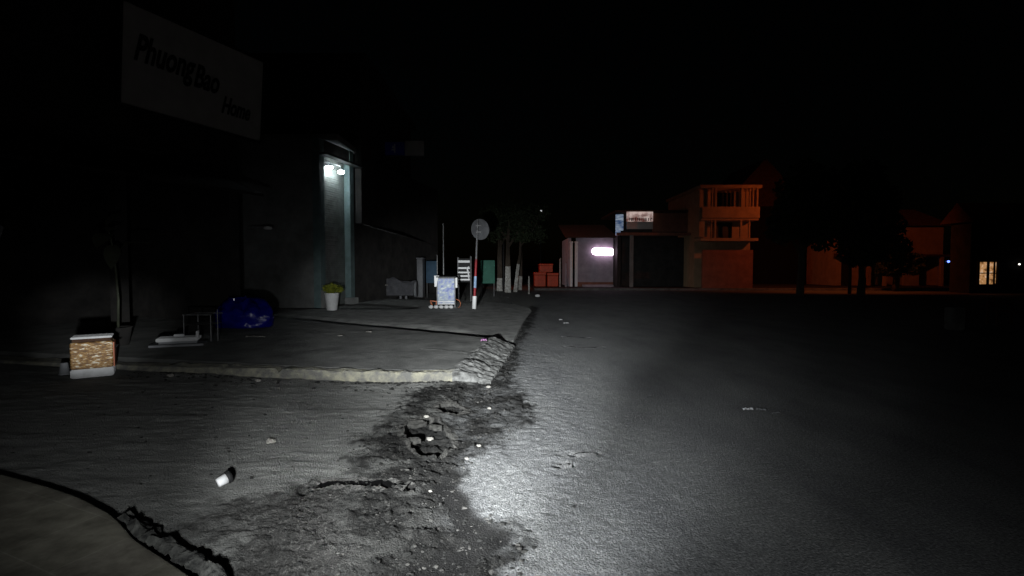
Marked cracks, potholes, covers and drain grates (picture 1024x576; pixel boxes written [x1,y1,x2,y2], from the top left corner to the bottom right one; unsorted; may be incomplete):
crack [303,476,410,493]
pothole [431,399,471,416]
crack [555,450,597,469]
pothole [397,415,459,460]
